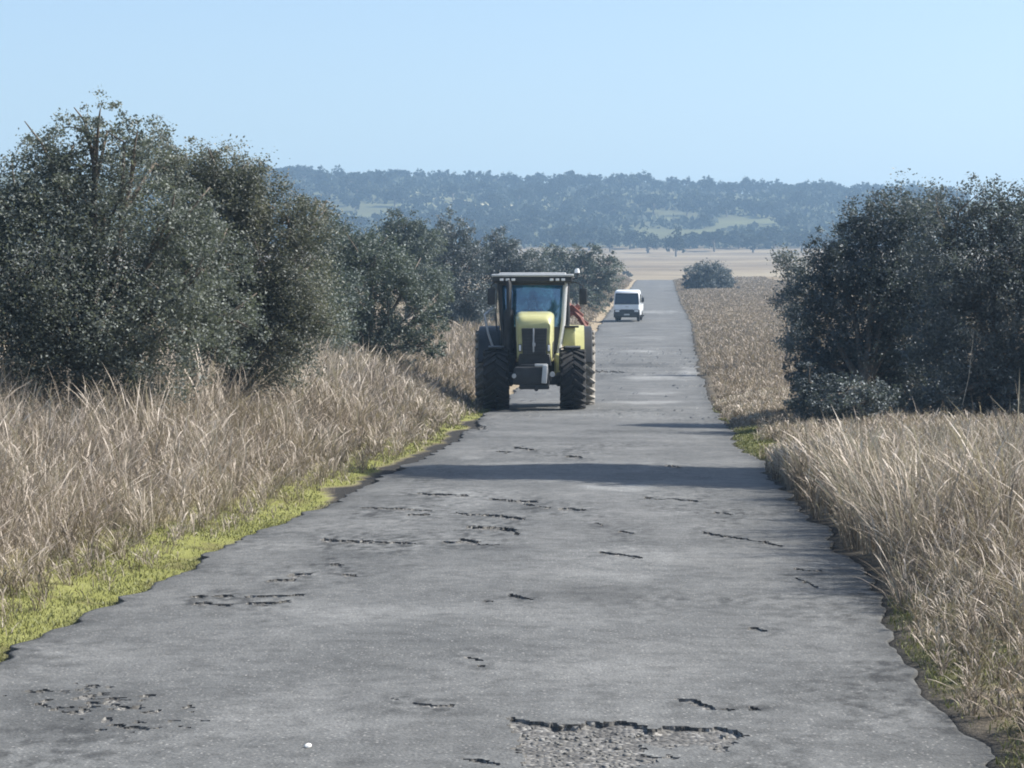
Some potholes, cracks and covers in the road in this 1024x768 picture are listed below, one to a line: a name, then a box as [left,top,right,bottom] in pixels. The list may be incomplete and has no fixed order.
pothole [505,717,750,768]
crack [359,492,643,559]
pothole [3,683,210,733]
crack [794,568,822,588]
crack [643,496,783,547]
